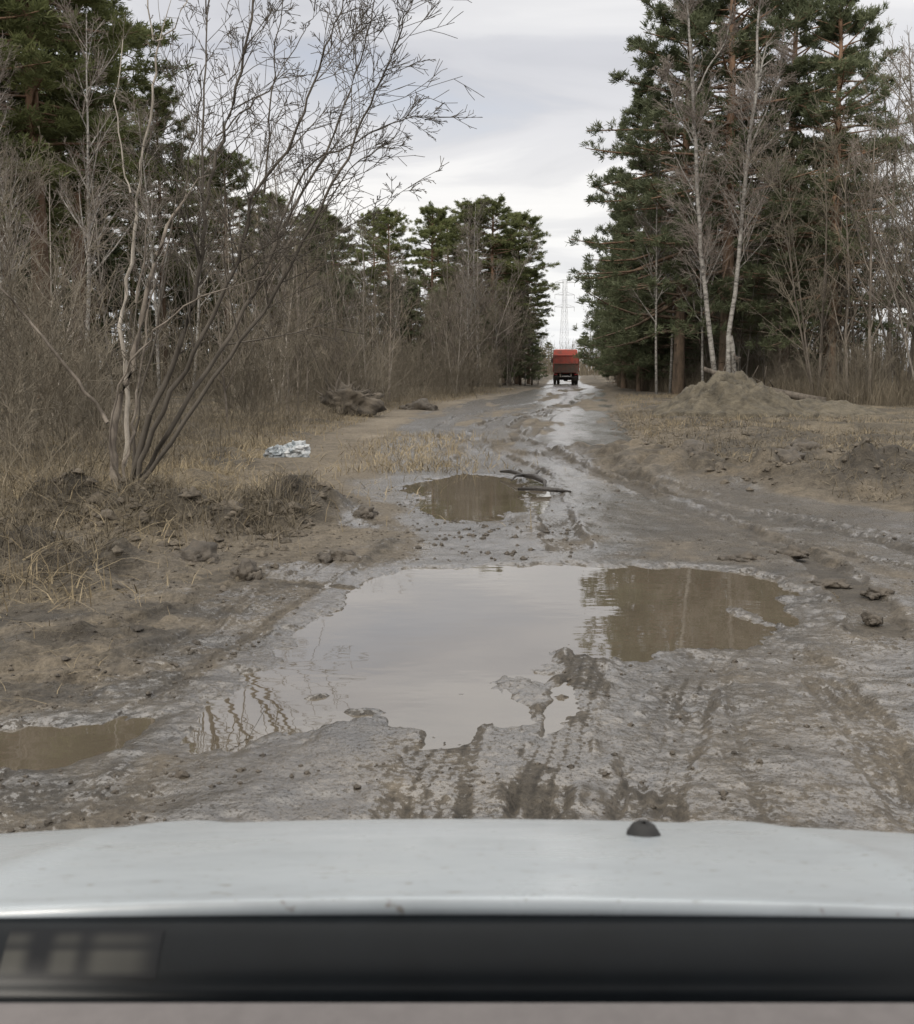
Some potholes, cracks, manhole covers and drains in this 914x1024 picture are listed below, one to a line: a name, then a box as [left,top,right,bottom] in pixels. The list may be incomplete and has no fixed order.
pothole [392,473,552,523]
pothole [0,691,264,782]
pothole [158,558,841,757]
